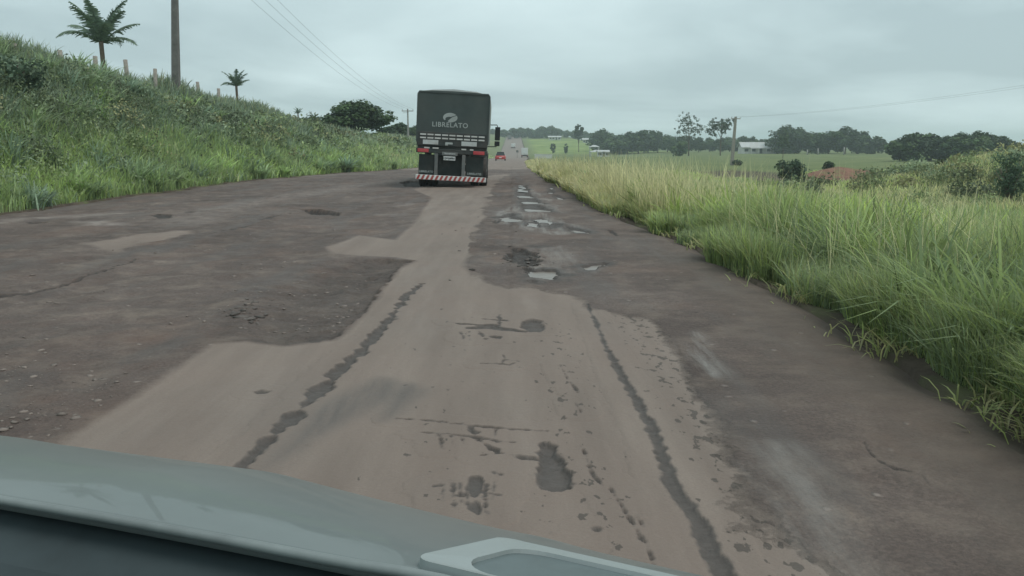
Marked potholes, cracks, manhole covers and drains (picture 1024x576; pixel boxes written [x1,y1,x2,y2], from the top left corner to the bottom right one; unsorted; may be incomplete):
pothole [480,212,537,225]
crack [0,257,154,300]
pothole [284,207,356,217]
pothole [516,267,582,283]
pothole [501,198,563,207]
pothole [488,246,561,271]
pothole [522,215,576,231]
pothole [500,192,542,200]
crack [833,433,965,499]
